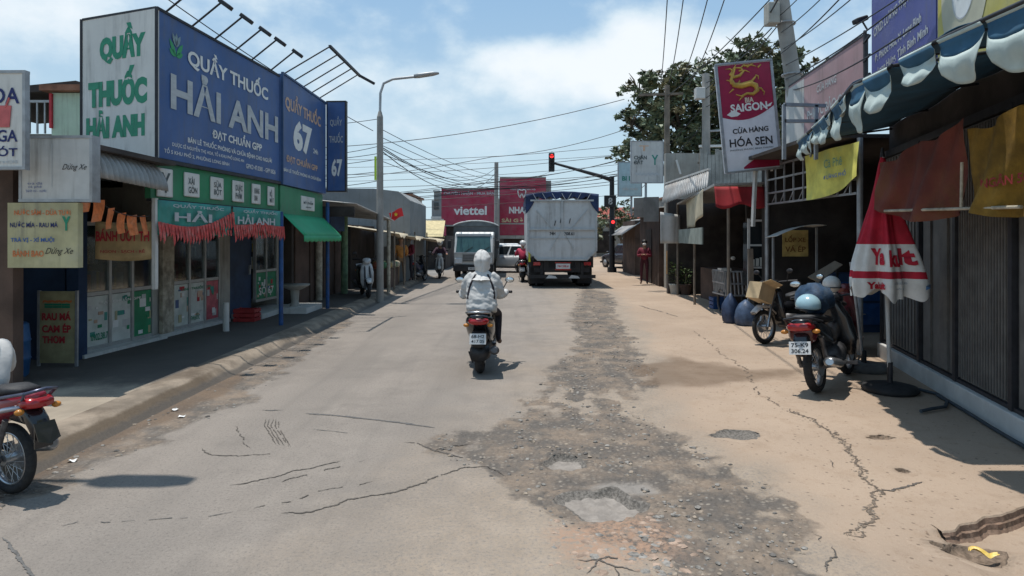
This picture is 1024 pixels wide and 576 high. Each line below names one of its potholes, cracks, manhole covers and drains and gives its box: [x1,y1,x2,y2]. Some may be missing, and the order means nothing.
pothole [541,483,662,528]
crack [232,442,505,514]
crack [694,331,922,571]
crack [576,556,634,576]
crack [202,410,290,456]
pothole [906,532,1024,575]
pothole [531,450,596,475]
